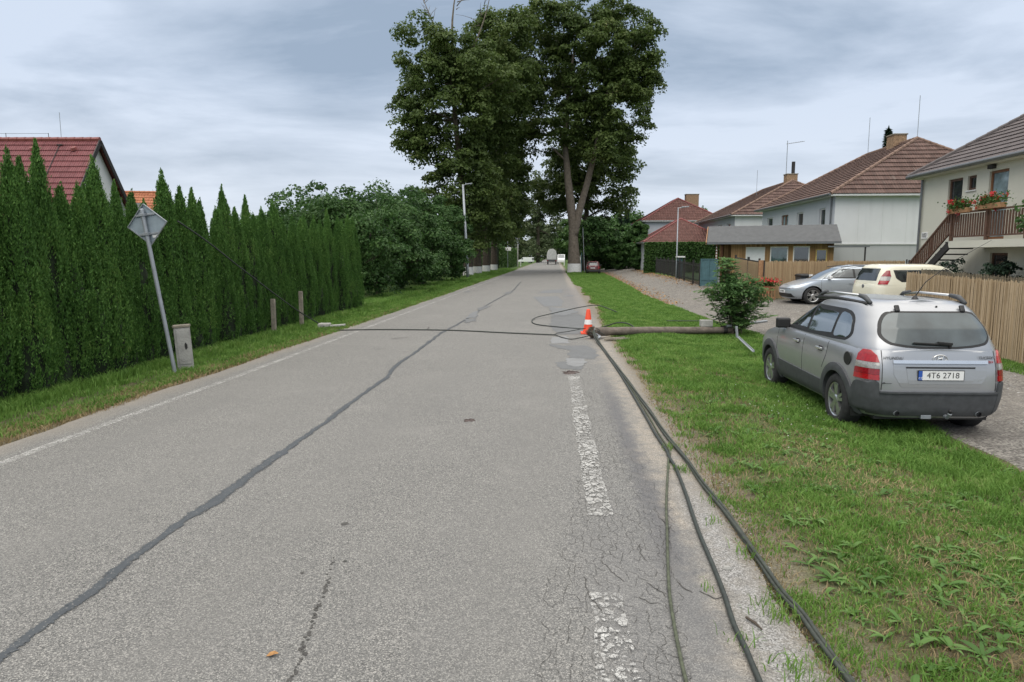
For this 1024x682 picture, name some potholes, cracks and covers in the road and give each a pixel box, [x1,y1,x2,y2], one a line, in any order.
crack [286,522,349,681]
crack [537,380,721,682]
